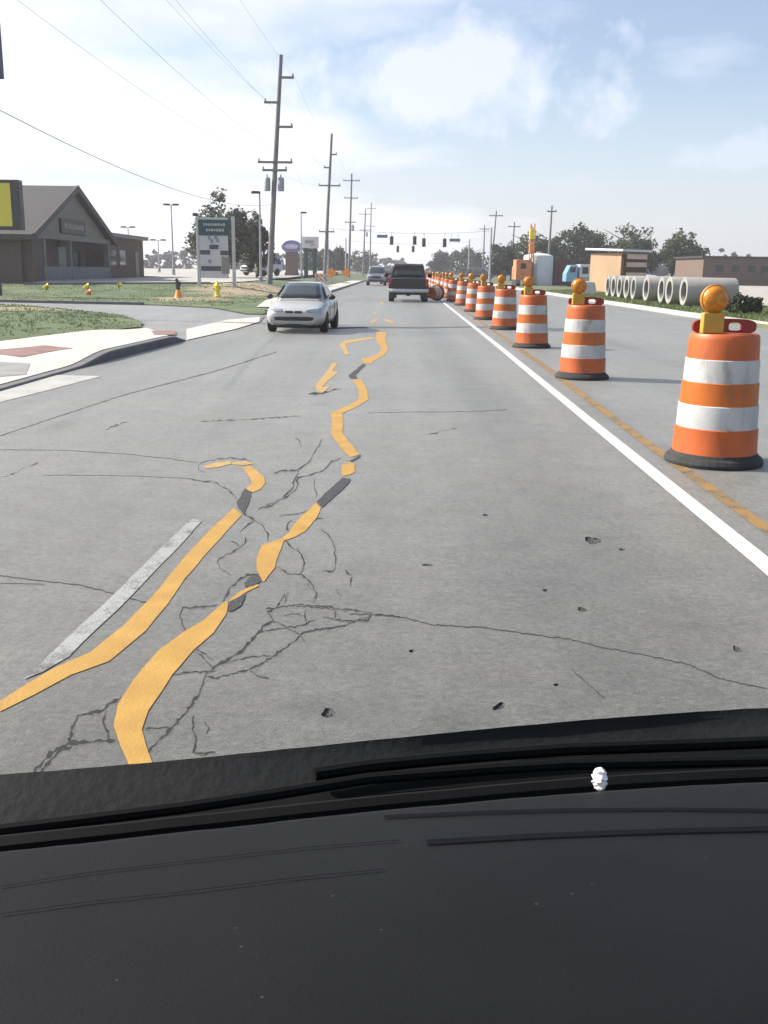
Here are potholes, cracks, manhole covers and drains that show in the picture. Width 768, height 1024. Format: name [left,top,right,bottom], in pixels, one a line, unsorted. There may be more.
pothole [321,708,336,718]
crack [0,437,768,772]
crack [369,409,507,434]
